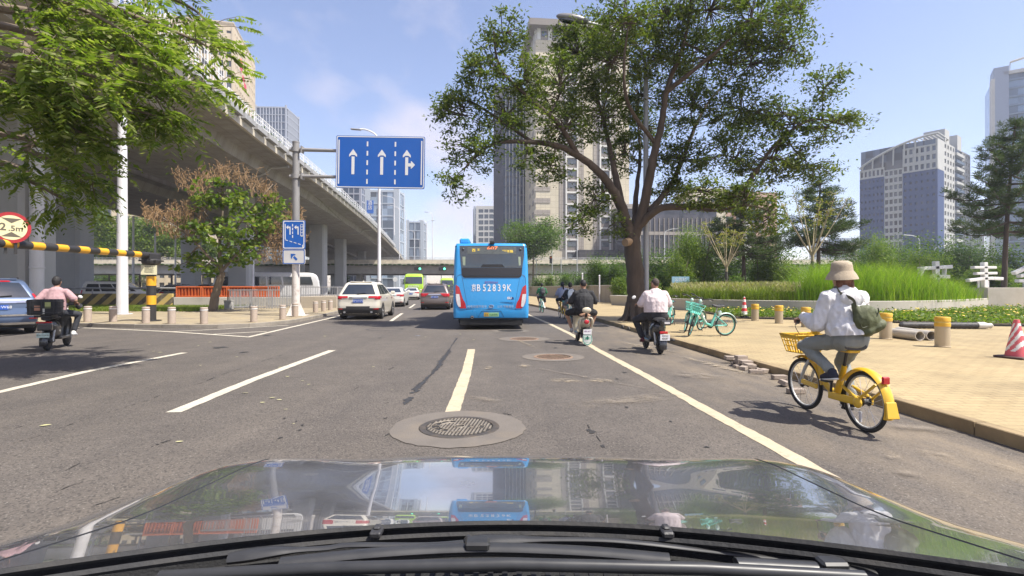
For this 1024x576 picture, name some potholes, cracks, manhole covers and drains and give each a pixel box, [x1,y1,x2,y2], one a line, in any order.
manhole cover [389,411,526,448]
manhole cover [522,353,584,361]
